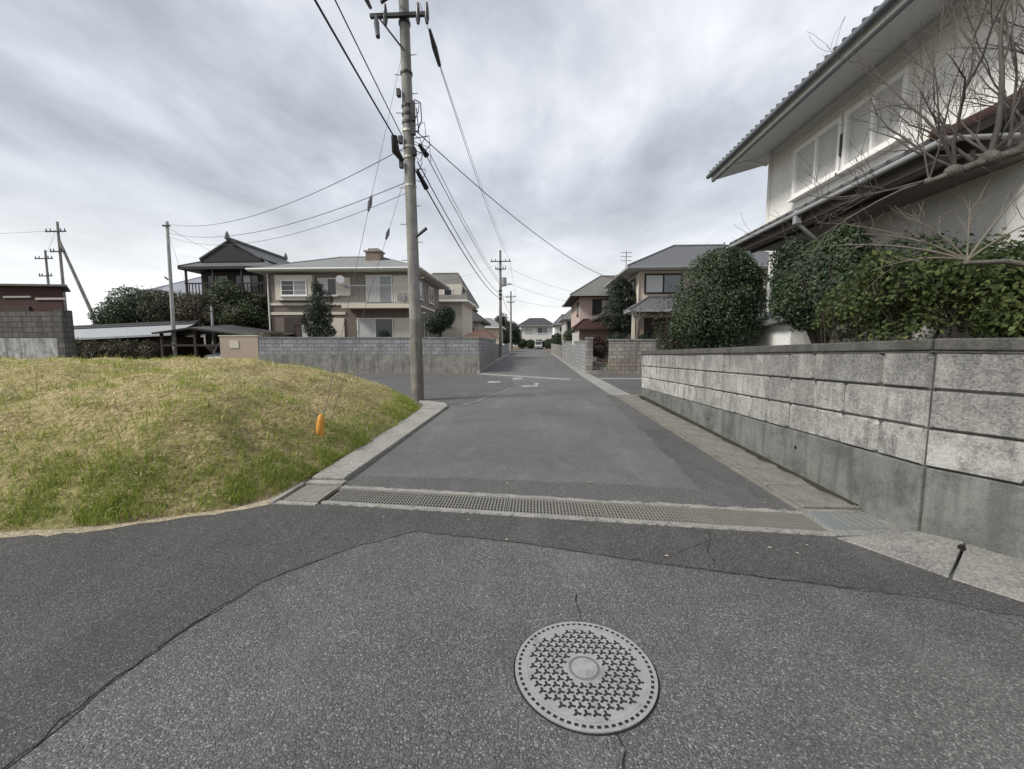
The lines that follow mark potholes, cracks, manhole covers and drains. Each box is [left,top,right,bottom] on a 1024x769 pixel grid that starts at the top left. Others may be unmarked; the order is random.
crack [418,531,898,594]
manhole cover [513,622,660,736]
